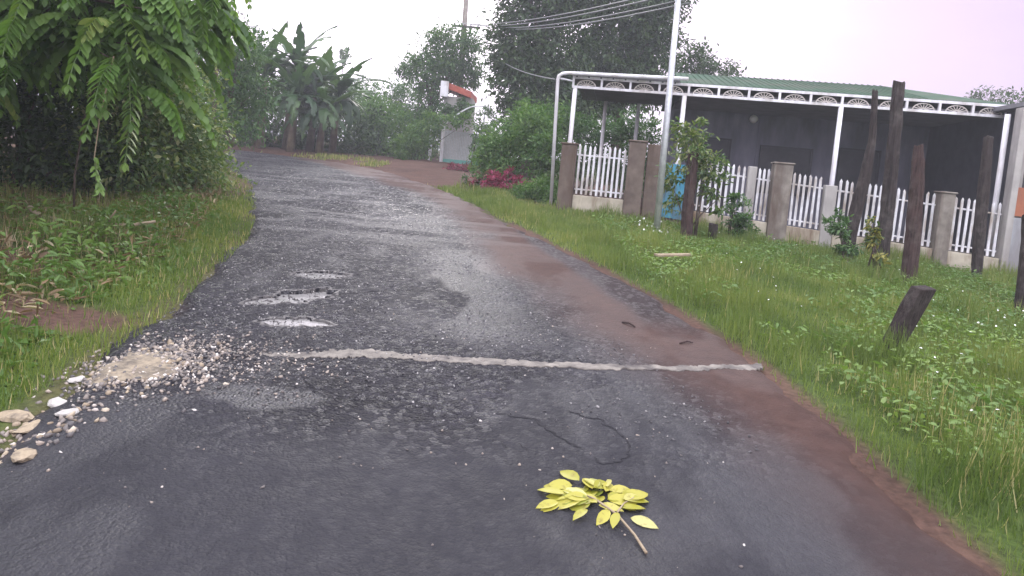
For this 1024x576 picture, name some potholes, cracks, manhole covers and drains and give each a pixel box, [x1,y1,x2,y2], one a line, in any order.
pothole [251,316,338,329]
pothole [238,286,341,305]
crack [495,411,631,464]
pothole [288,270,353,279]
